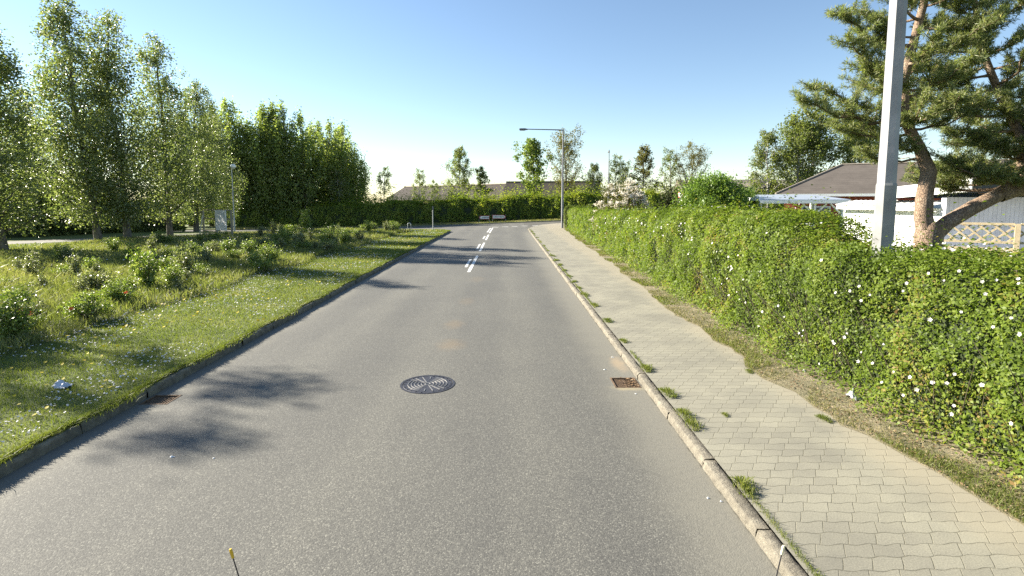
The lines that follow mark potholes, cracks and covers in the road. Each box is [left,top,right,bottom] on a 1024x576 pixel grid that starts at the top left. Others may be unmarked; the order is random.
manhole cover [400,375,455,394]
drain grate [139,395,182,405]
drain grate [610,377,641,388]
